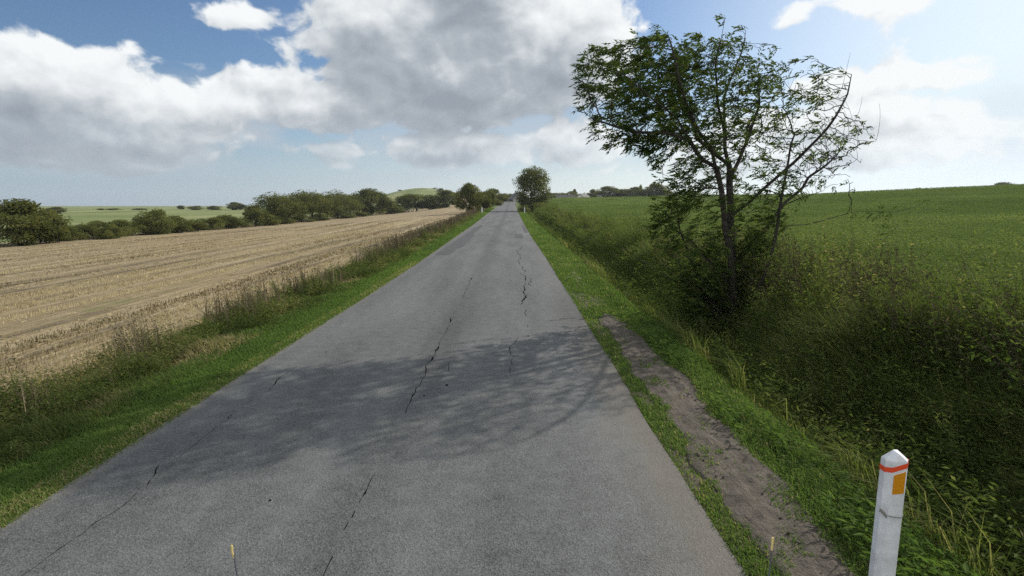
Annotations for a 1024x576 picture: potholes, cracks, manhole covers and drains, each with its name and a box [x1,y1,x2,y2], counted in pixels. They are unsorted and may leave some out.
crack [22,367,296,576]
